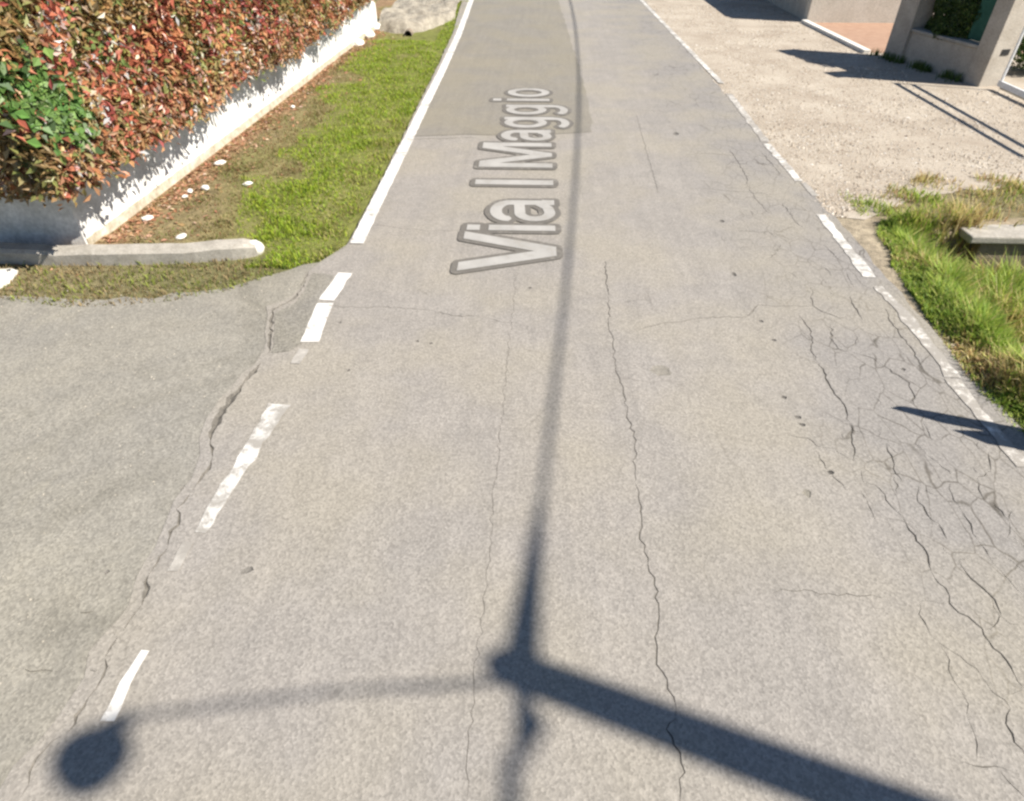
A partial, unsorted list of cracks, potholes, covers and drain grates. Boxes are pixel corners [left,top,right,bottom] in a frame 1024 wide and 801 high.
crack [636,245,1024,794]
crack [21,271,309,797]
crack [604,262,685,797]
